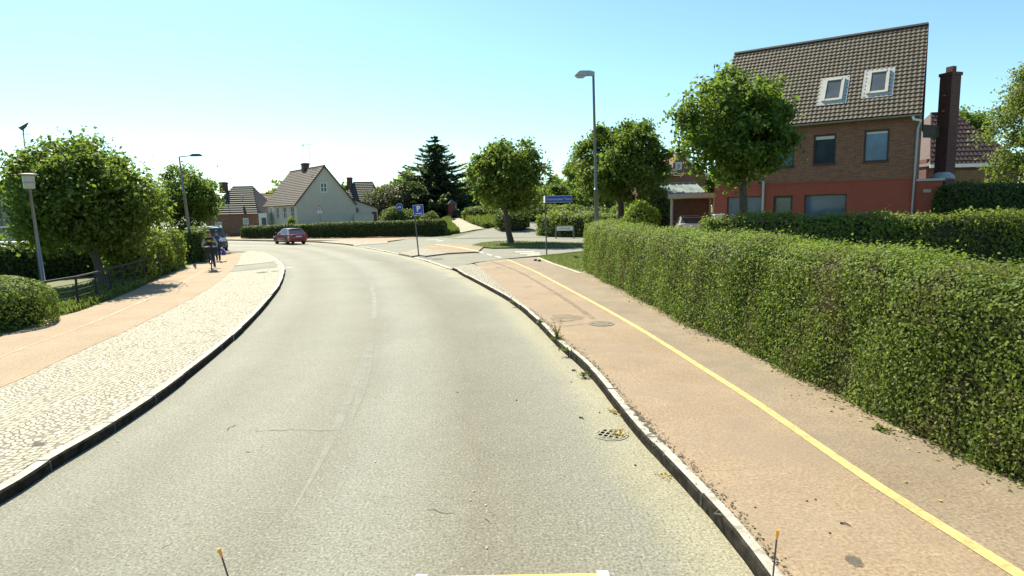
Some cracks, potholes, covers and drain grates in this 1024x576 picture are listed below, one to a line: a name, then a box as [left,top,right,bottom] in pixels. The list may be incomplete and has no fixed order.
drain grate [593,428,628,441]
